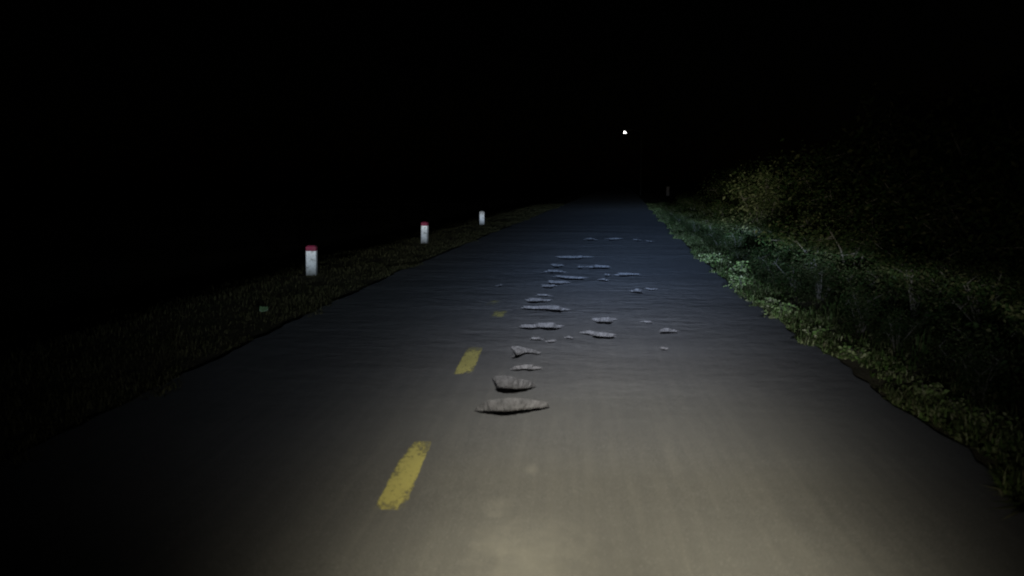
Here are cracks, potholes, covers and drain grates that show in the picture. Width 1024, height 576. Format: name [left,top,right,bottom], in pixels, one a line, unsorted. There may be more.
pothole [520,305,571,313]
pothole [591,317,618,325]
pothole [580,331,616,339]
pothole [492,376,536,393]
pothole [474,398,550,416]
pothole [511,346,541,358]
